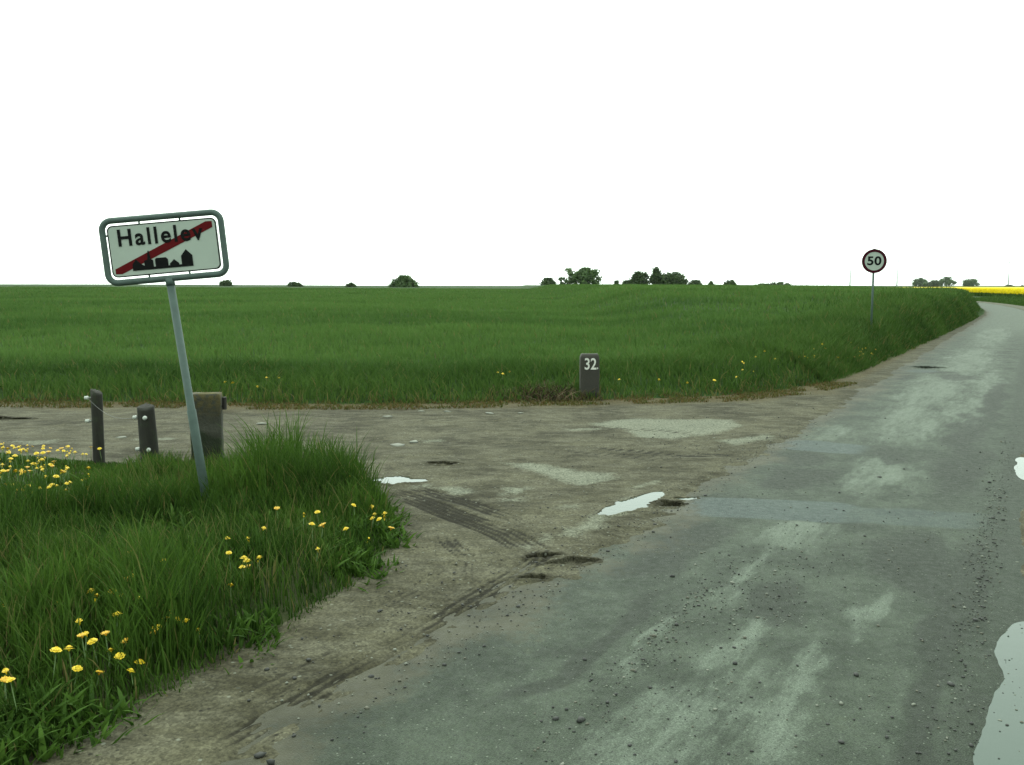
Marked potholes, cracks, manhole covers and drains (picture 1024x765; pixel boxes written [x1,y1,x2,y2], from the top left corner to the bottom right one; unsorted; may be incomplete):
pothole [649,498,688,509]
pothole [534,554,603,568]
pothole [517,550,569,562]
pothole [507,572,557,583]
